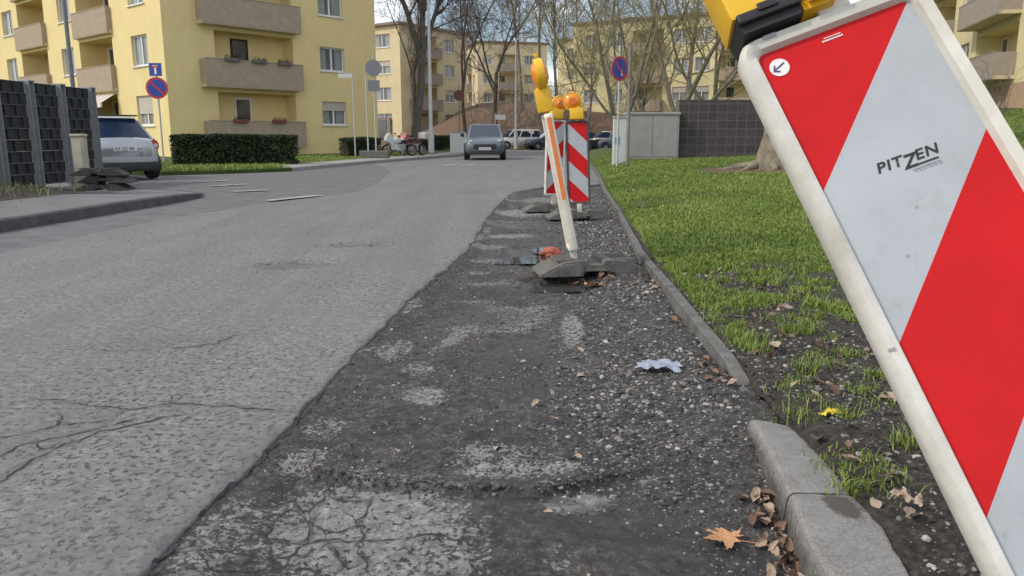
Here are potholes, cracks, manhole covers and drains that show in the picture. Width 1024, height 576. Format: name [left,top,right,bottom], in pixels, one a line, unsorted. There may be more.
crack [0,393,294,481]
crack [192,453,482,576]
